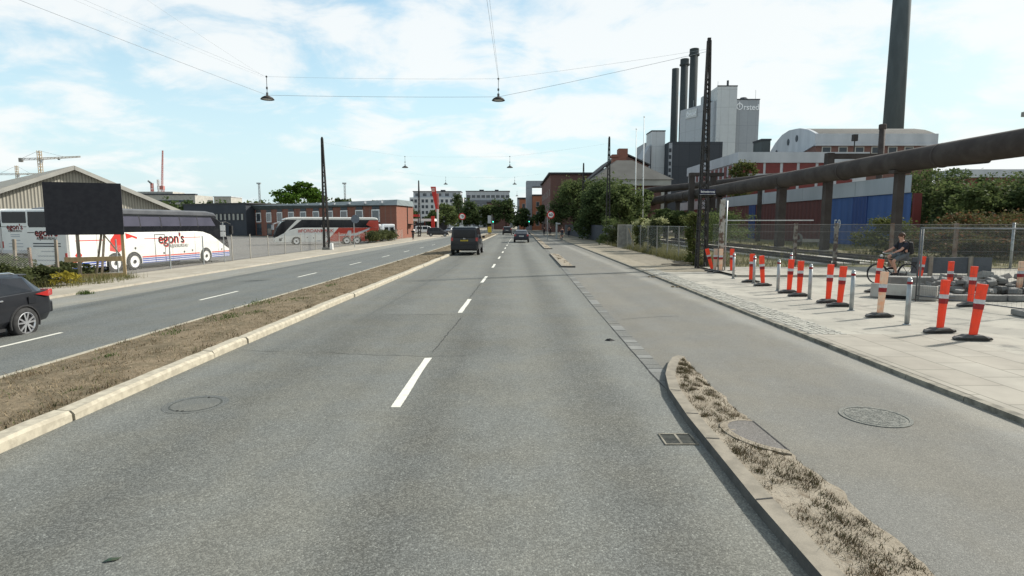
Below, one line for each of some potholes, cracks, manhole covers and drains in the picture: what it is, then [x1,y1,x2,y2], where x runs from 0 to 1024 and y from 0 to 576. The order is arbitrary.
drain grate [658,433,699,445]
manhole cover [838,406,914,428]
manhole cover [161,395,229,414]
